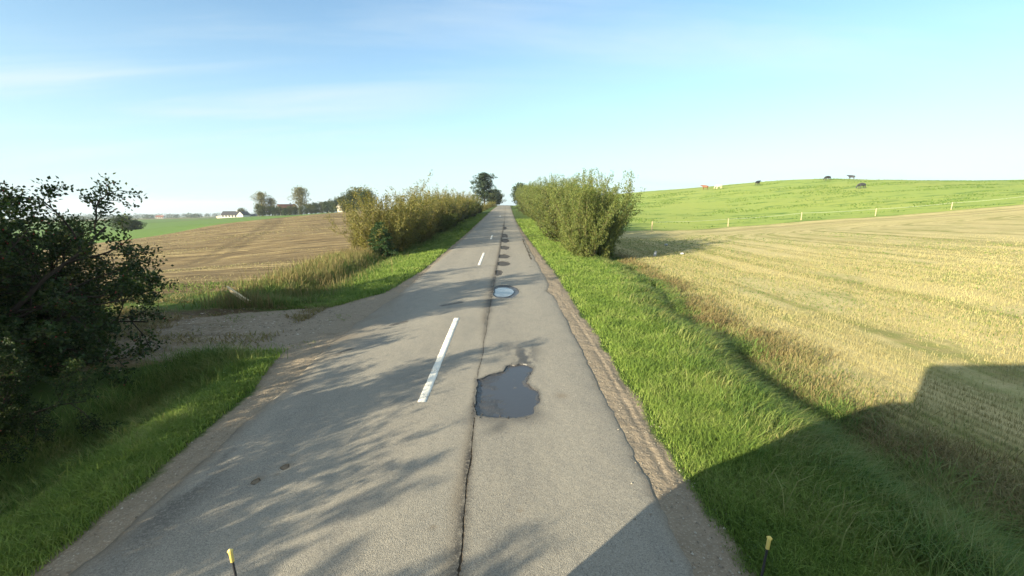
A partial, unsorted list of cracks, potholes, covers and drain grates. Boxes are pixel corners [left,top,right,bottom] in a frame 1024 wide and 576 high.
pothole [471,362,544,420]
pothole [247,476,265,487]
crack [457,222,505,576]
pothole [276,462,294,472]
